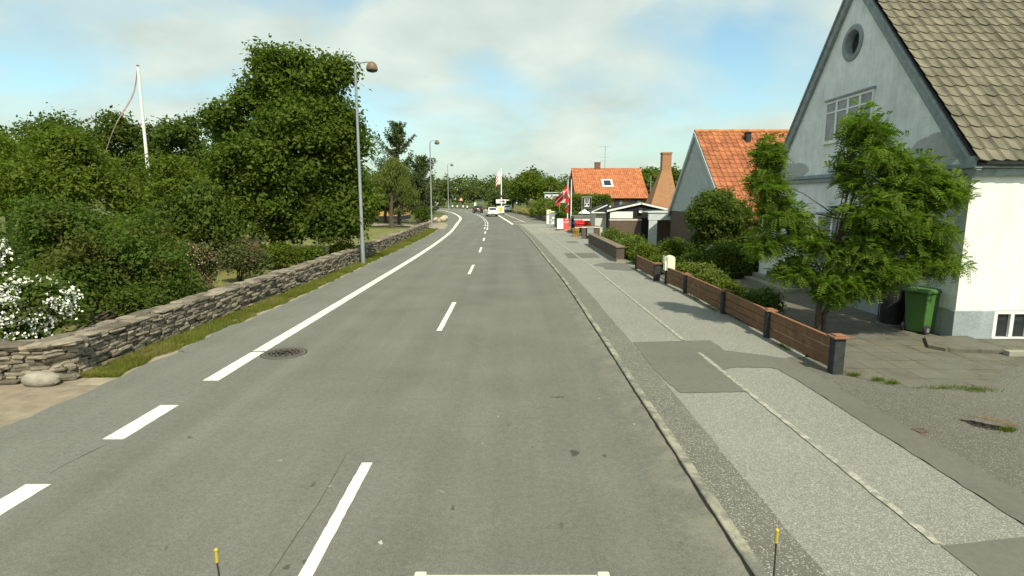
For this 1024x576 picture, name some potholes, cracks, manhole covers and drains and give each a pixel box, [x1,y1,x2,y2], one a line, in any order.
manhole cover [260,347,307,359]
pothole [954,417,1018,433]
crack [269,455,346,576]
